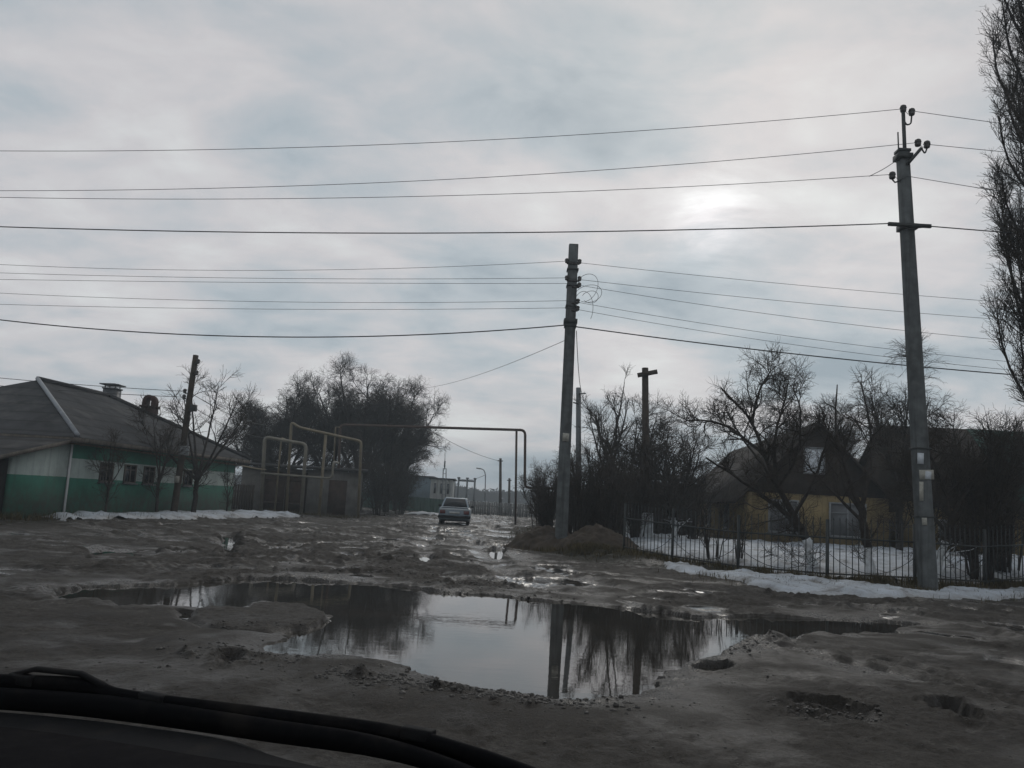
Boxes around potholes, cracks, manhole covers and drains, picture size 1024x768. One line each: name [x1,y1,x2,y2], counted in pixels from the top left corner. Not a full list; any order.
pothole [40,572,935,701]
pothole [210,532,244,553]
pothole [915,693,993,723]
pothole [772,689,887,725]
pothole [484,546,510,560]
